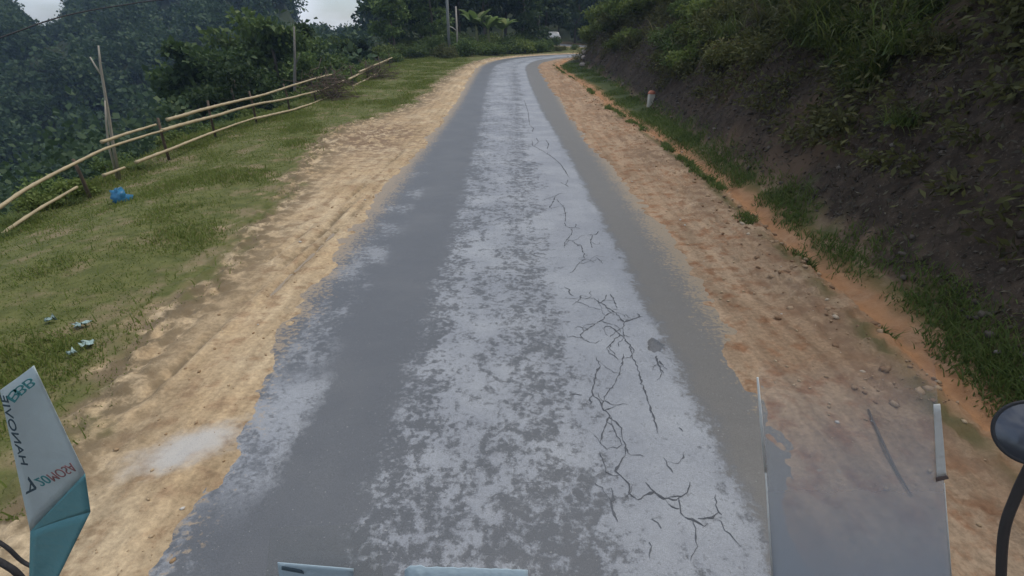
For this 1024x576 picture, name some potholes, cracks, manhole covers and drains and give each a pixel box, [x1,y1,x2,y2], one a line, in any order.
crack [524,101,737,558]
